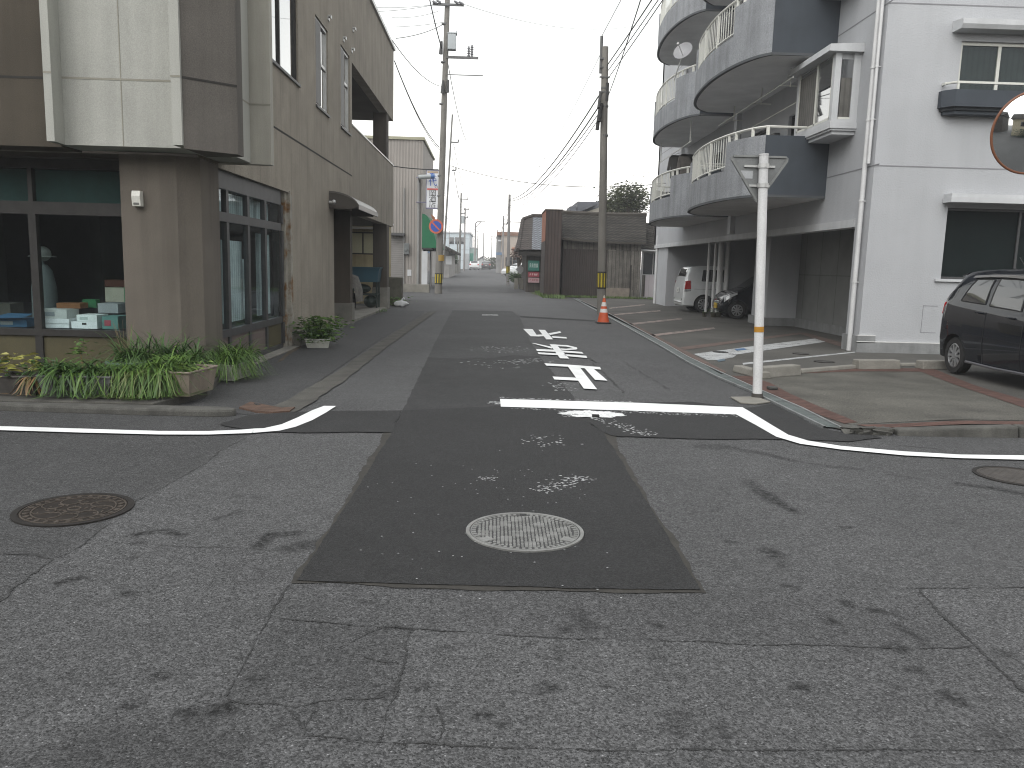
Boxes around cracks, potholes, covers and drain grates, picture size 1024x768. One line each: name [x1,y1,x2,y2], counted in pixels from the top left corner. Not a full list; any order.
manhole cover [466,512,584,553]
manhole cover [10,493,135,527]
manhole cover [972,466,1024,486]
